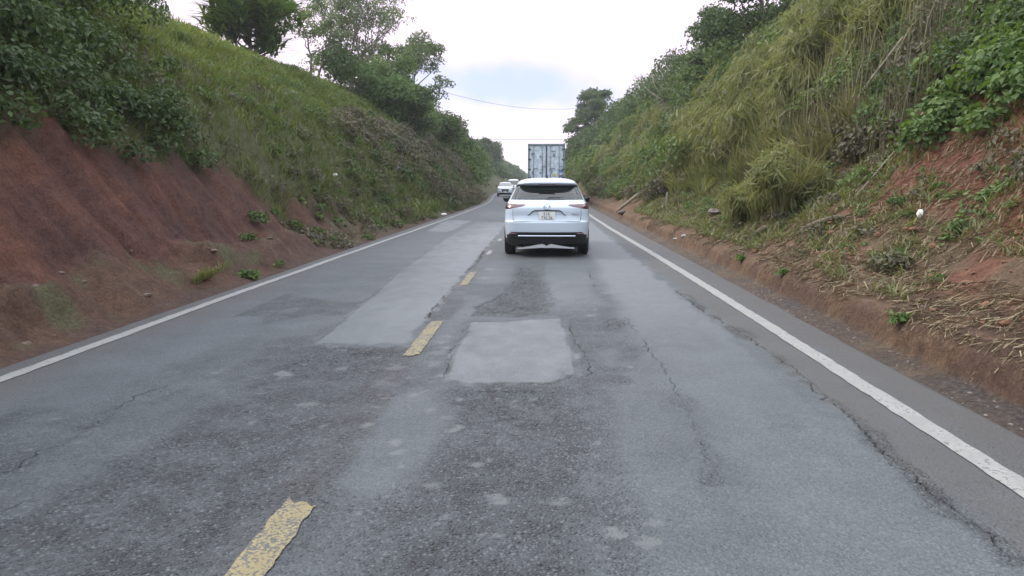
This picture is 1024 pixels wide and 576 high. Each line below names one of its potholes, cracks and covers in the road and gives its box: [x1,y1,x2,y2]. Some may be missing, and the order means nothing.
crack [0,383,178,474]
crack [565,317,727,475]
